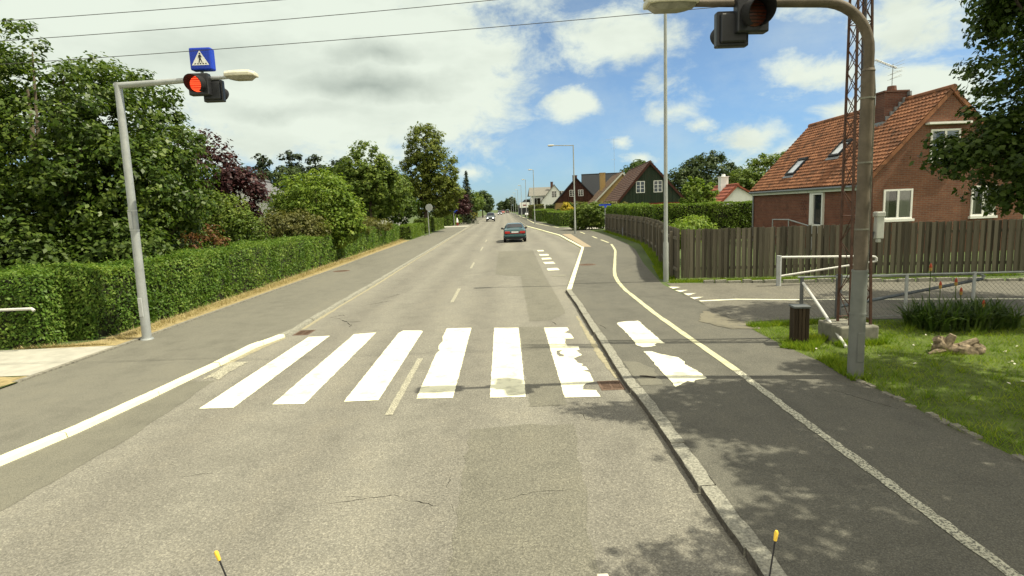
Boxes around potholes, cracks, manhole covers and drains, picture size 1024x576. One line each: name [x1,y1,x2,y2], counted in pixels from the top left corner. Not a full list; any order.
drain grate [597,380,626,391]
crack [337,495,435,506]
